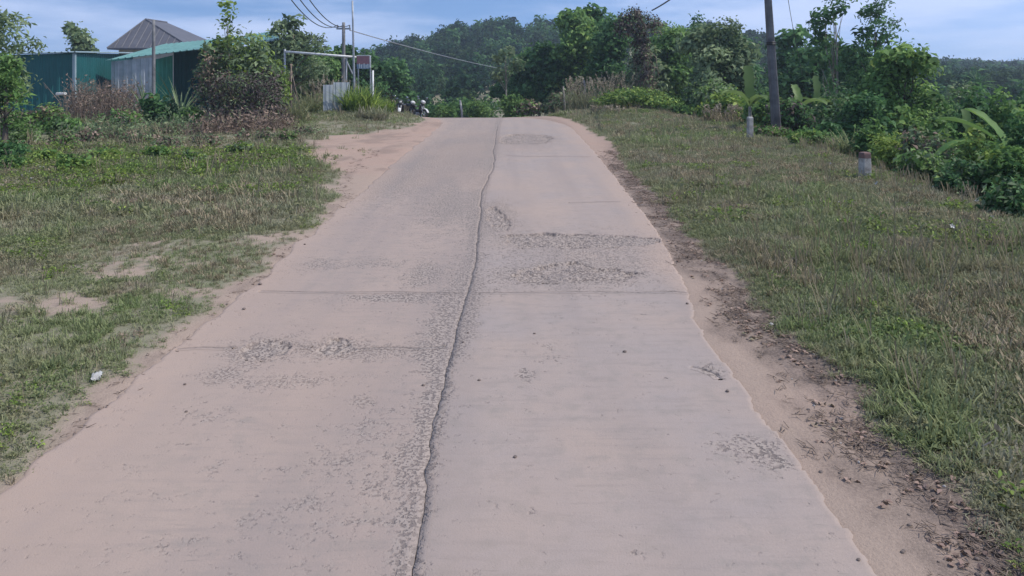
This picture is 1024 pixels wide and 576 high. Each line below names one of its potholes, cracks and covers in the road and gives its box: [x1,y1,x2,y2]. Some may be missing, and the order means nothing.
pothole [310,336,362,358]
pothole [229,336,296,362]
pothole [501,232,663,250]
pothole [507,260,645,284]
crack [176,126,591,576]
